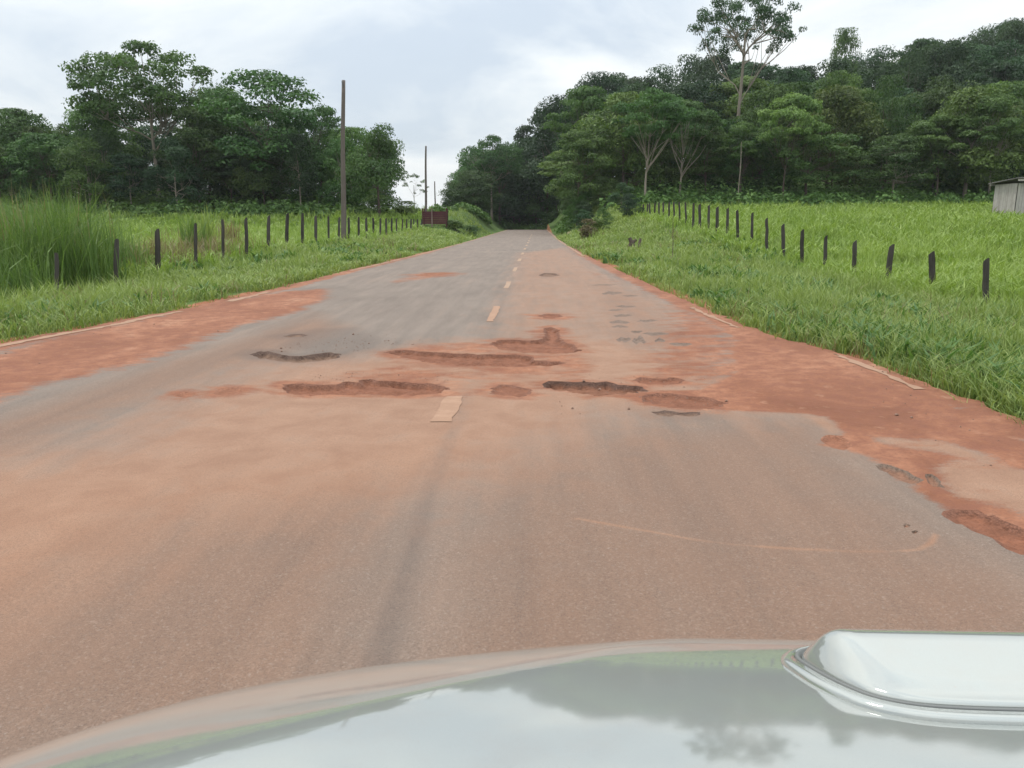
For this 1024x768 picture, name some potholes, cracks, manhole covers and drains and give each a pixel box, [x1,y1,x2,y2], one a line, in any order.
pothole [875,464,923,484]
pothole [542,381,648,396]
pothole [490,327,582,354]
pothole [212,387,244,396]
pothole [925,474,945,488]
pothole [821,435,852,450]
pothole [640,393,729,410]
pothole [250,351,342,363]
pothole [282,379,450,396]
pothole [489,385,533,397]
pothole [385,350,564,367]
pothole [941,509,1024,555]
